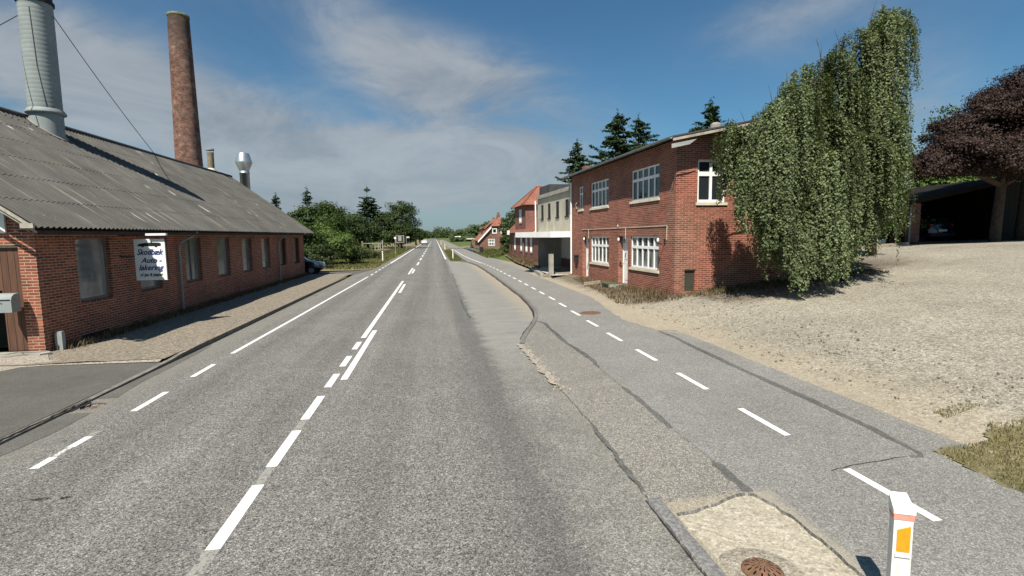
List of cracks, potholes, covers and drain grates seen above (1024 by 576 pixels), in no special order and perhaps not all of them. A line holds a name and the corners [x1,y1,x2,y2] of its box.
drain grate [718,548,805,576]
